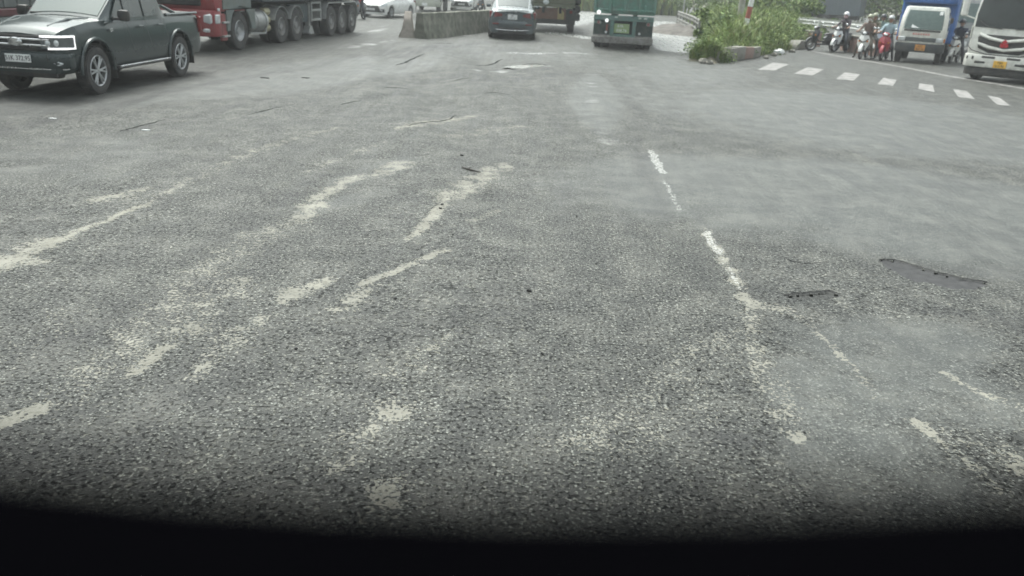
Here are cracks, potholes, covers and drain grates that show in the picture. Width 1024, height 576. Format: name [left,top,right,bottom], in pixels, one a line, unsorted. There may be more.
pothole [784,289,841,300]
pothole [878,259,989,290]
